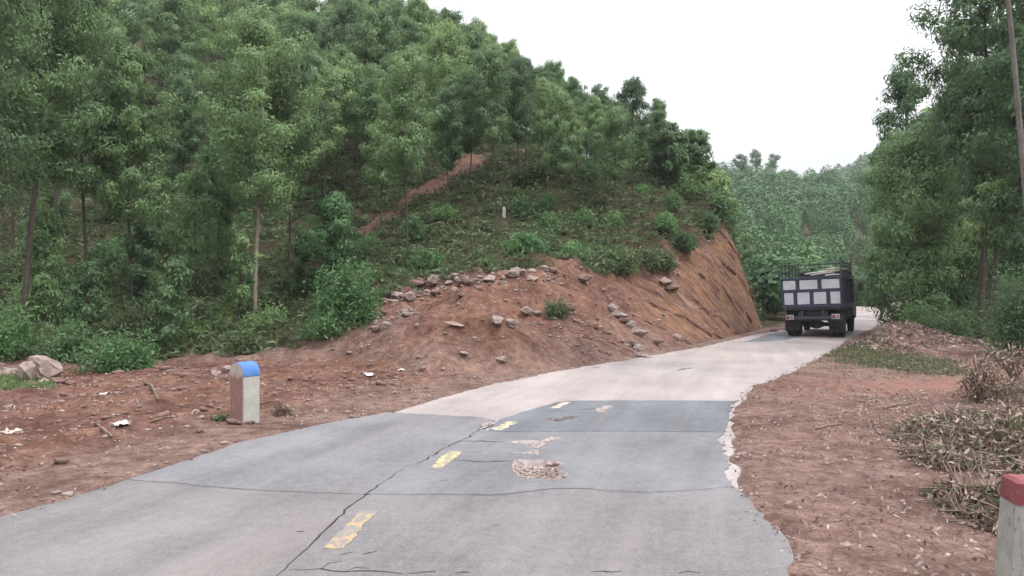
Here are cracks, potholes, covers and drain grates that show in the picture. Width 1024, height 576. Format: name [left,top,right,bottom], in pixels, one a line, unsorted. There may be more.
pothole [511,459,570,480]
crack [162,430,705,576]
pothole [509,437,561,448]
